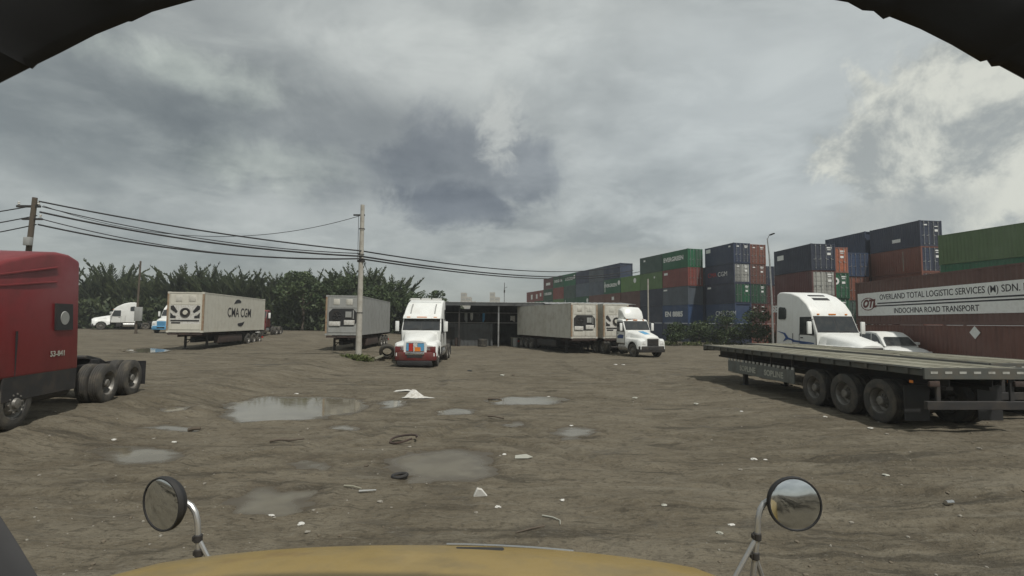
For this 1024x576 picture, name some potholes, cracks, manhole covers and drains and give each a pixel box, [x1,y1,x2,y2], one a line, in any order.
pothole [469,394,579,407]
pothole [188,394,399,424]
pothole [58,438,202,469]
pothole [325,445,514,486]
pothole [427,405,489,416]
pothole [209,477,352,521]
